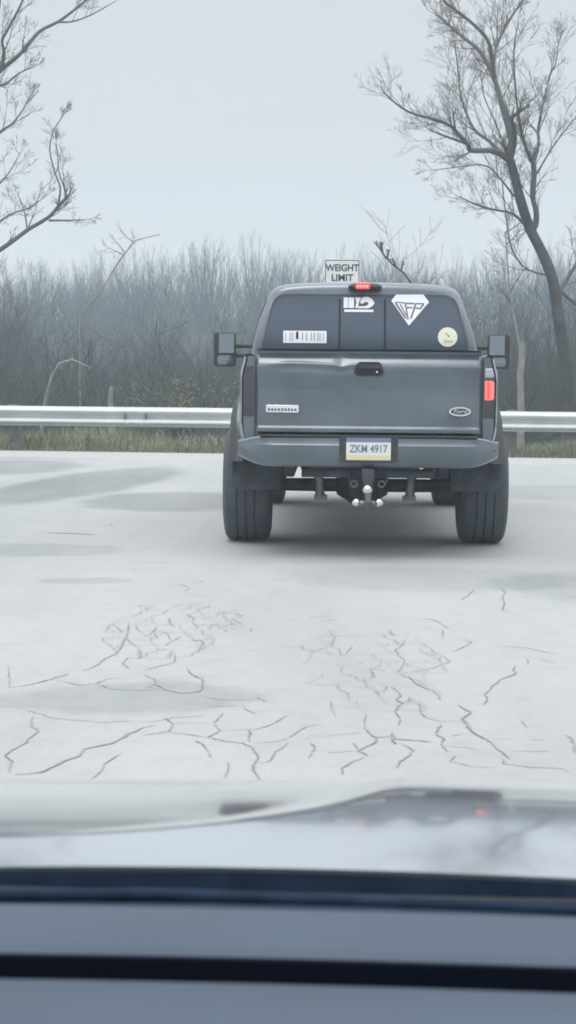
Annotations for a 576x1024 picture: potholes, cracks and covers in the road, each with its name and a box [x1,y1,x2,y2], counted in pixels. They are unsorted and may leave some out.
crack [5,603,576,780]
